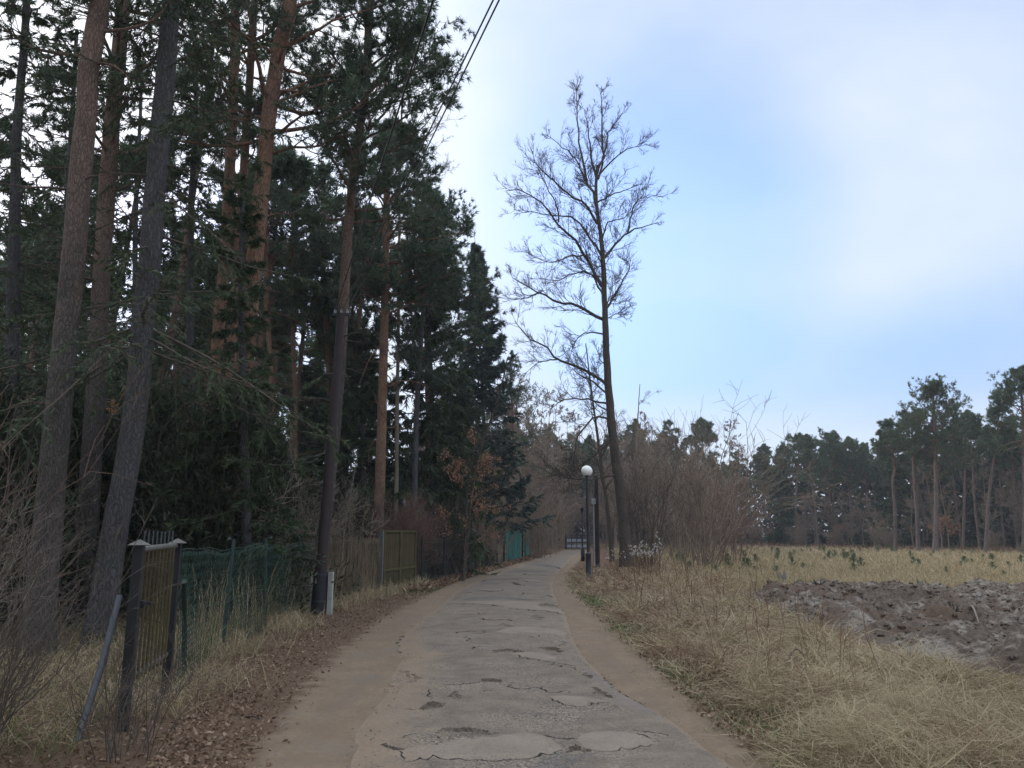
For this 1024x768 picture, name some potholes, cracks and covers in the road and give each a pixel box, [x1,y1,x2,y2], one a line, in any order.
pothole [435,727,499,740]
crack [398,727,576,762]
crack [453,565,578,671]
pothole [418,701,446,710]
crack [601,729,669,752]
crack [411,678,645,710]
